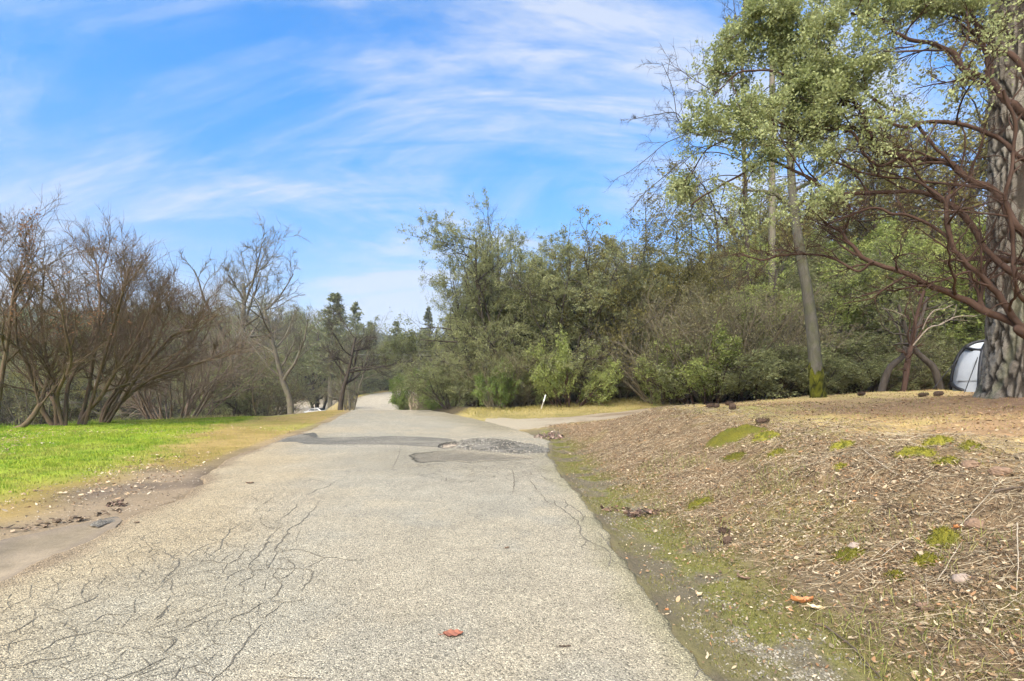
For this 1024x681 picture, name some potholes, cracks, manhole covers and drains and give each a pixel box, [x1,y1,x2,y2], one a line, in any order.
pothole [456,438,550,453]
crack [416,460,639,576]
crack [0,480,371,681]
